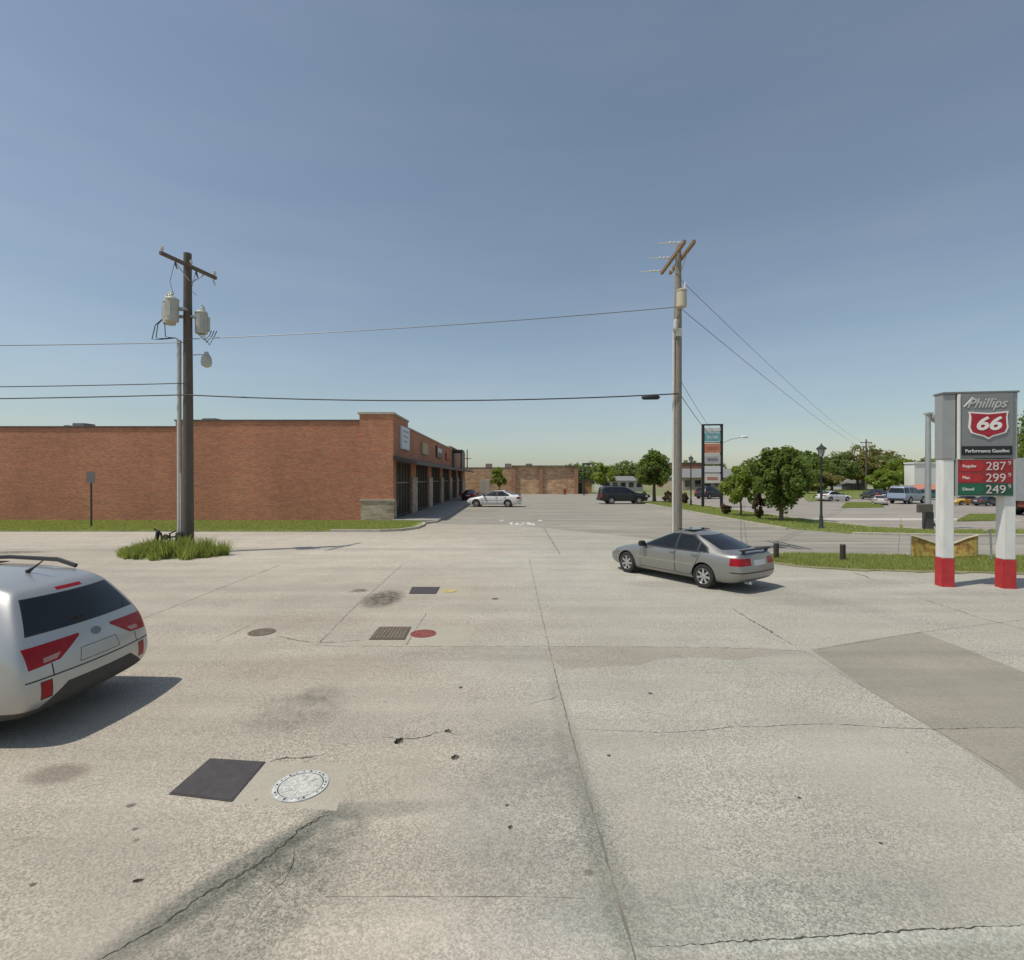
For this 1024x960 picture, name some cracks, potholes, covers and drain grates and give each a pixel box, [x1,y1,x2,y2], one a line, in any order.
manhole cover [272,770,329,802]
crack [98,811,333,960]
manhole cover [410,629,436,638]
manhole cover [247,628,276,636]
crack [386,731,461,741]
crack [566,724,1013,733]
crack [646,924,1023,948]
